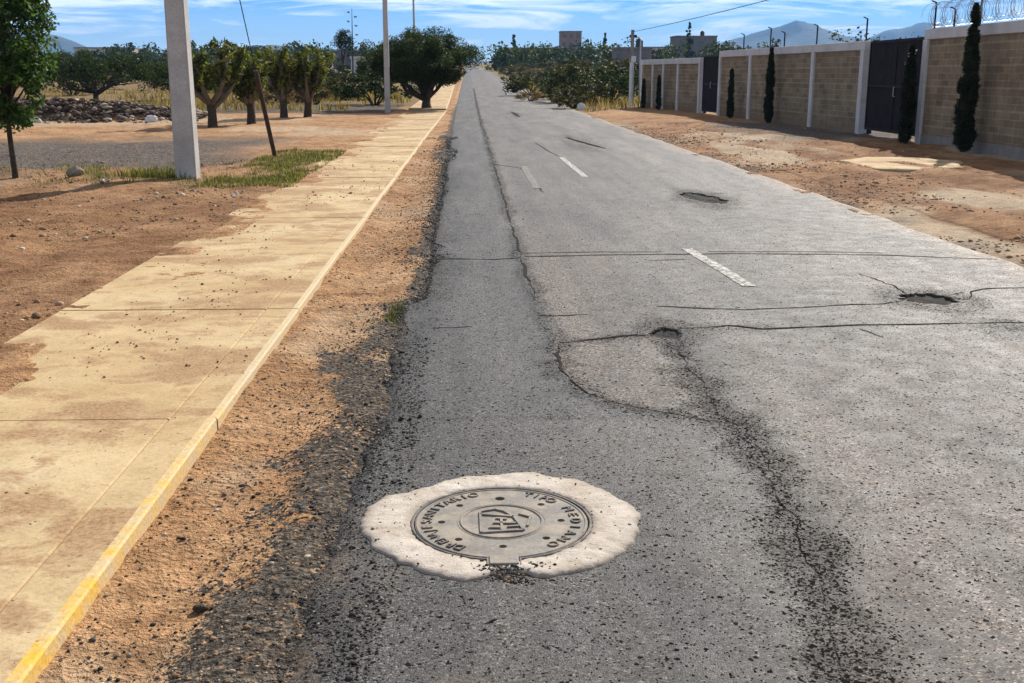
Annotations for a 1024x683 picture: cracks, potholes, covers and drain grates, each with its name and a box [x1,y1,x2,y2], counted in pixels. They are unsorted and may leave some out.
crack [555,335,849,677]
pothole [651,328,681,339]
pothole [681,193,726,204]
manhole cover [359,472,641,582]
pothole [899,294,954,305]
crack [663,273,1024,338]
